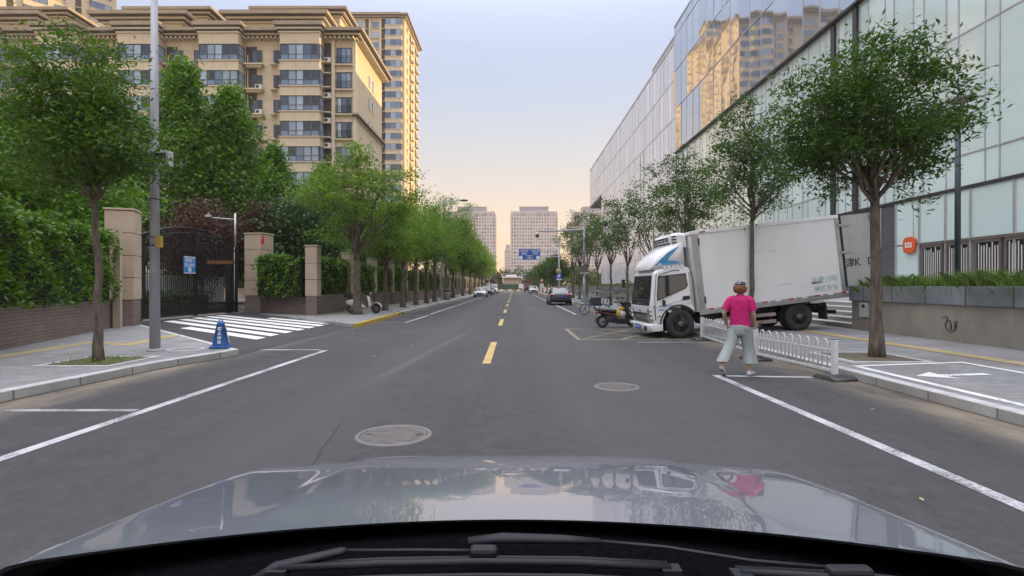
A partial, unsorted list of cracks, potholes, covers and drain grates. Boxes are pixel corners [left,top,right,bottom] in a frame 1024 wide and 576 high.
manhole cover [594,382,640,392]
manhole cover [354,425,433,447]
crack [312,421,341,465]
